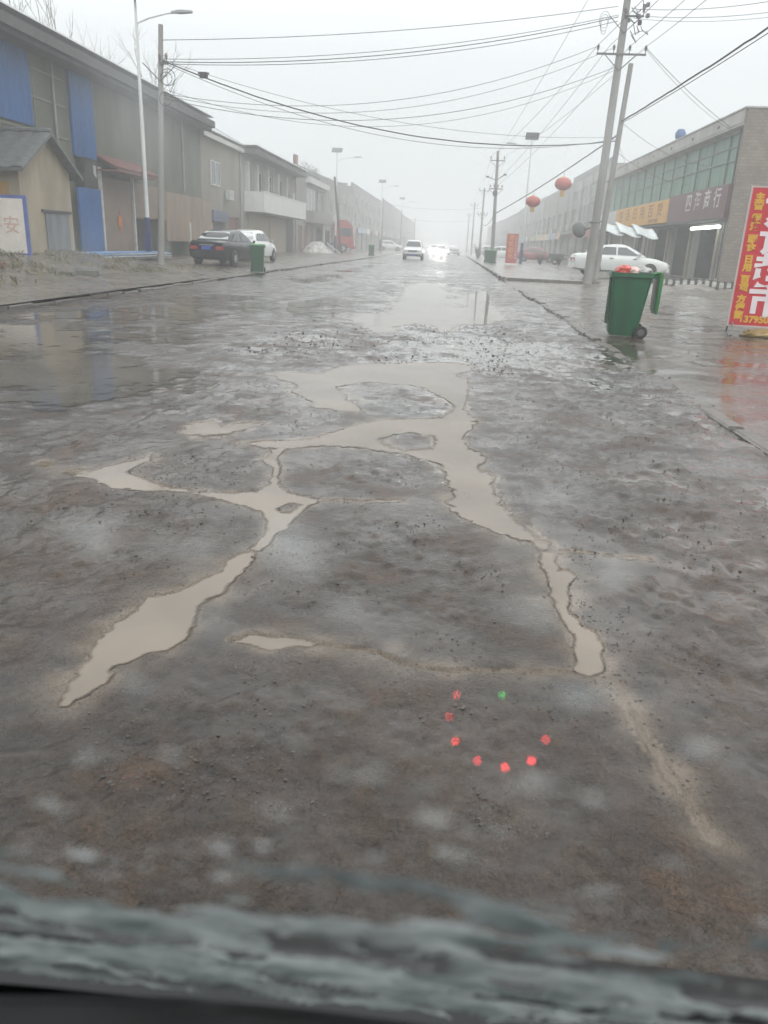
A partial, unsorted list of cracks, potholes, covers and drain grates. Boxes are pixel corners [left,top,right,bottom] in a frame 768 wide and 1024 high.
pothole [225,630,320,651]
pothole [328,282,512,336]
pothole [177,419,268,441]
crack [316,642,576,676]
pothole [55,549,257,709]
pothole [181,448,320,552]
pothole [246,362,565,556]
pothole [534,552,609,678]
pothole [61,452,186,493]
